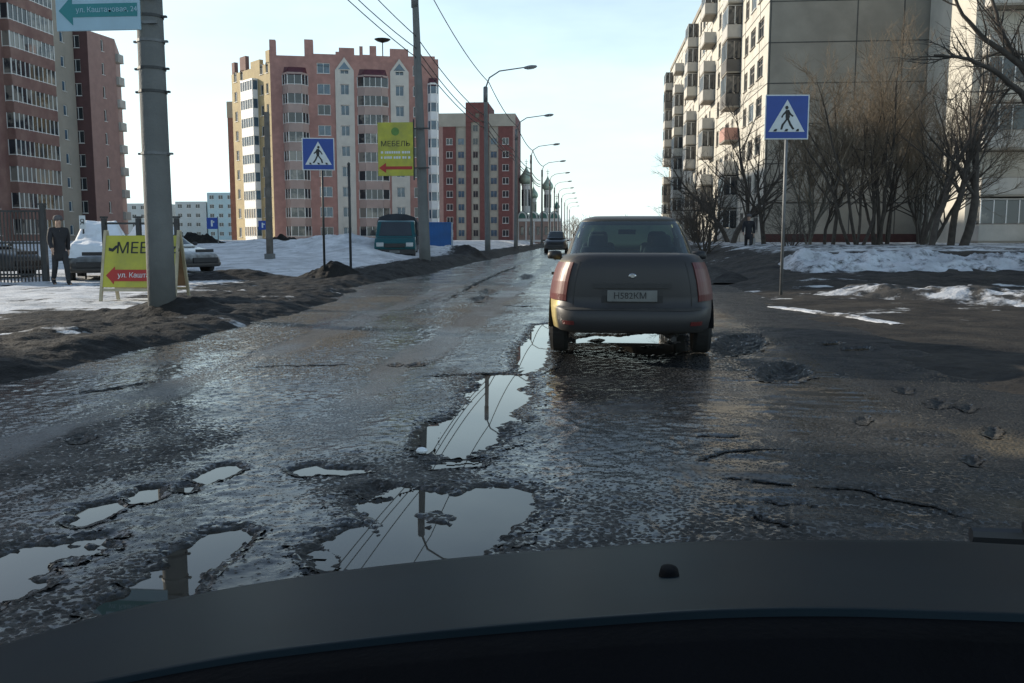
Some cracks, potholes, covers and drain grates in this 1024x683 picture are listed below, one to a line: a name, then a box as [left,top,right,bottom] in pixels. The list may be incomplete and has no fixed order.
pothole [181,460,251,485]
pothole [921,397,956,410]
pothole [116,482,171,505]
pothole [962,453,985,467]
pothole [0,527,133,611]
pothole [855,415,874,425]
pothole [748,361,821,383]
pothole [710,333,771,357]
pothole [499,322,563,374]
pothole [55,496,135,529]
crack [694,435,971,527]
pothole [283,460,377,477]
